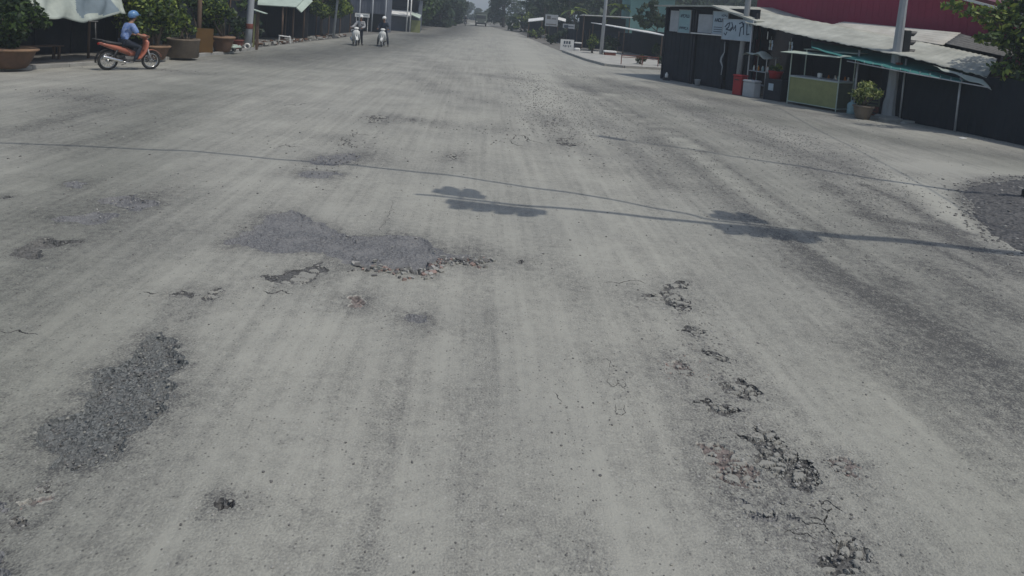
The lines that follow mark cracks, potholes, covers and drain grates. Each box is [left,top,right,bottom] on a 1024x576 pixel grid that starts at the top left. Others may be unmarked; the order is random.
pothole [682,398,745,417]
pothole [637,276,716,312]
pothole [309,153,361,166]
pothole [298,170,344,179]
crack [784,500,842,539]
pothole [96,194,160,212]
pothole [717,375,764,402]
pothole [9,237,85,259]
pothole [251,262,330,288]
pothole [214,497,235,511]
